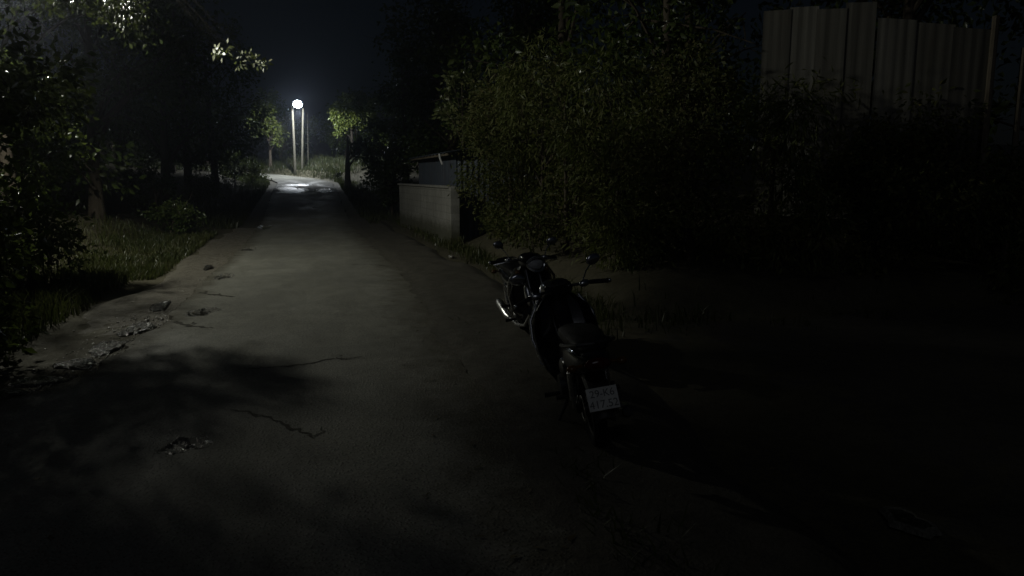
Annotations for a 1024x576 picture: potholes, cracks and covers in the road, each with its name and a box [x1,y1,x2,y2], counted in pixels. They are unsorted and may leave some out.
pothole [185,307,223,317]
pothole [157,437,213,454]
crack [231,409,325,439]
crack [247,355,361,369]
